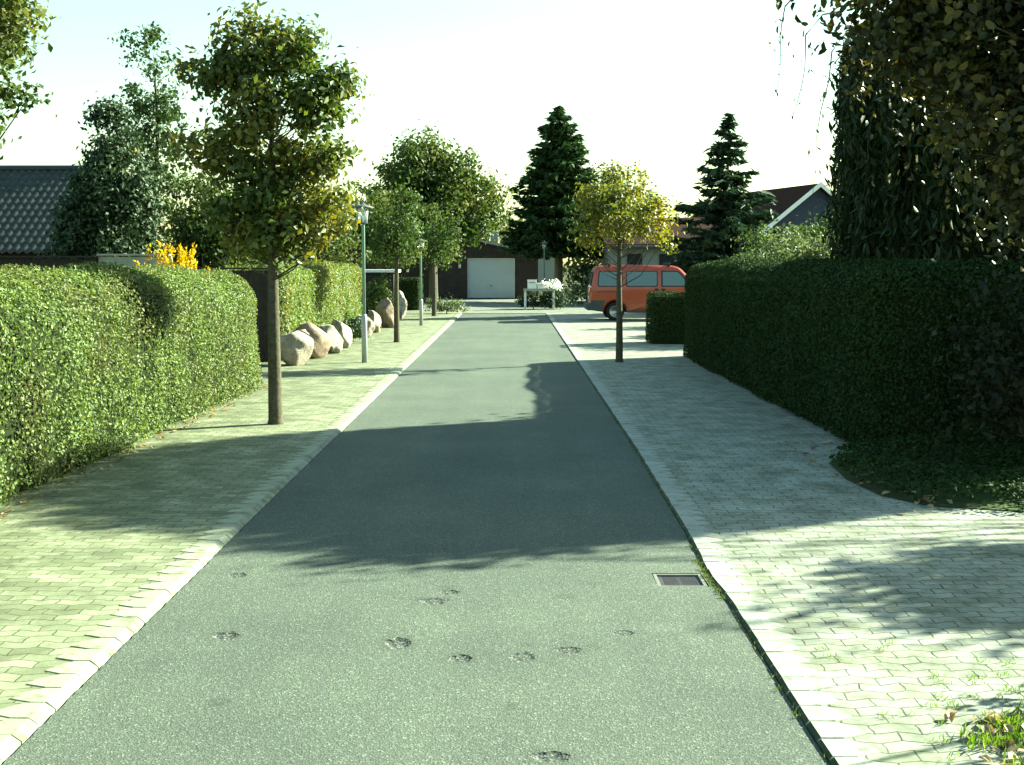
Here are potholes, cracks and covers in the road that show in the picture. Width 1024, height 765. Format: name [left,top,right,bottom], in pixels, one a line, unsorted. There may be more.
pothole [383,637,412,649]
pothole [212,631,240,640]
pothole [508,651,535,662]
pothole [530,751,572,763]
pothole [449,654,473,663]
drain grate [652,574,707,586]
